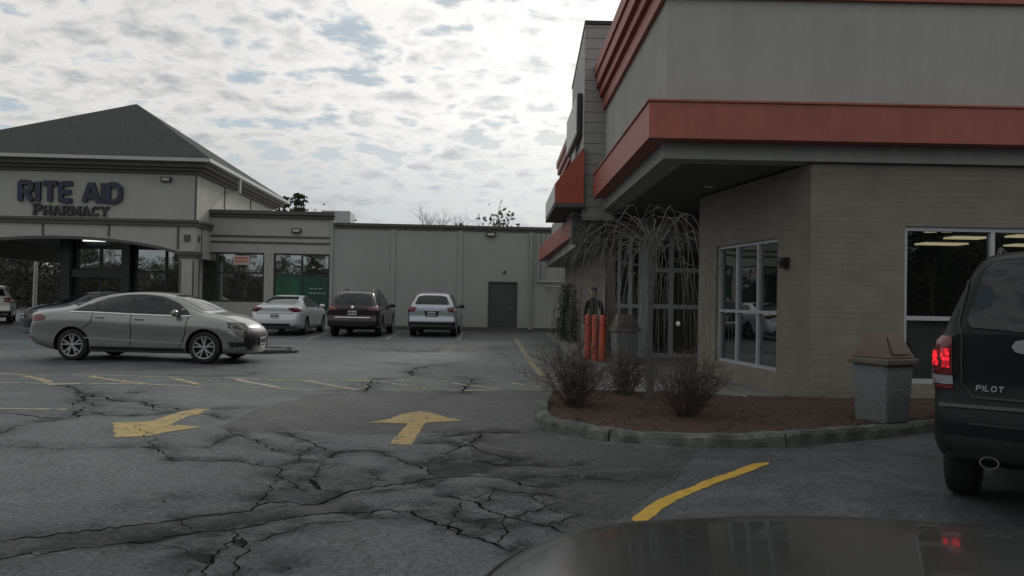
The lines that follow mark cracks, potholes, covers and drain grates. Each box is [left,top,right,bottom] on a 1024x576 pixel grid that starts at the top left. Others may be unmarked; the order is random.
crack [0,385,180,434]
crack [0,408,588,576]
crack [363,349,442,393]
